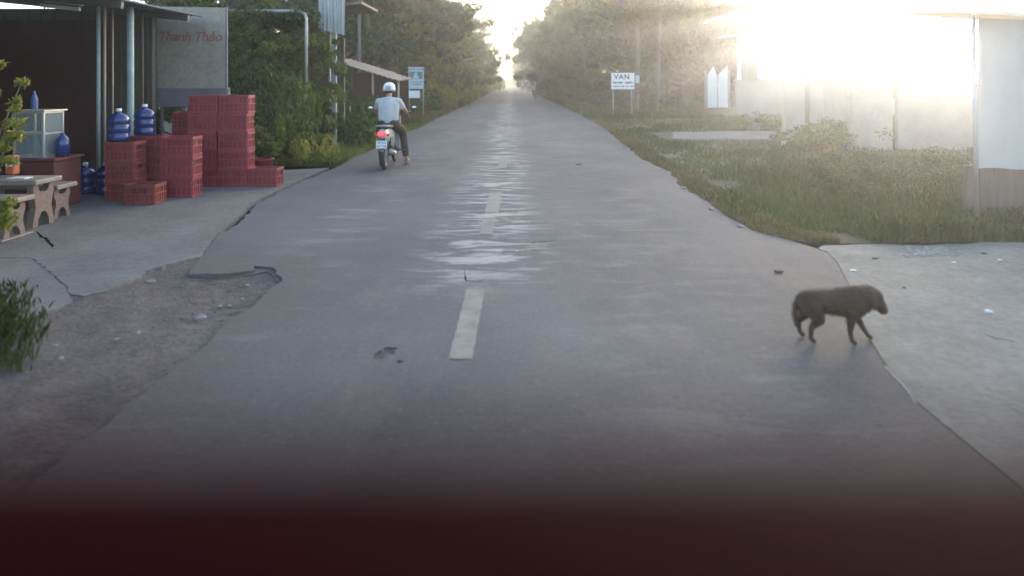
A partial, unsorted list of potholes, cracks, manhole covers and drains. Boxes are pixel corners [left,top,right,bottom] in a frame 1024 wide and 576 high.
pothole [373,347,397,362]
